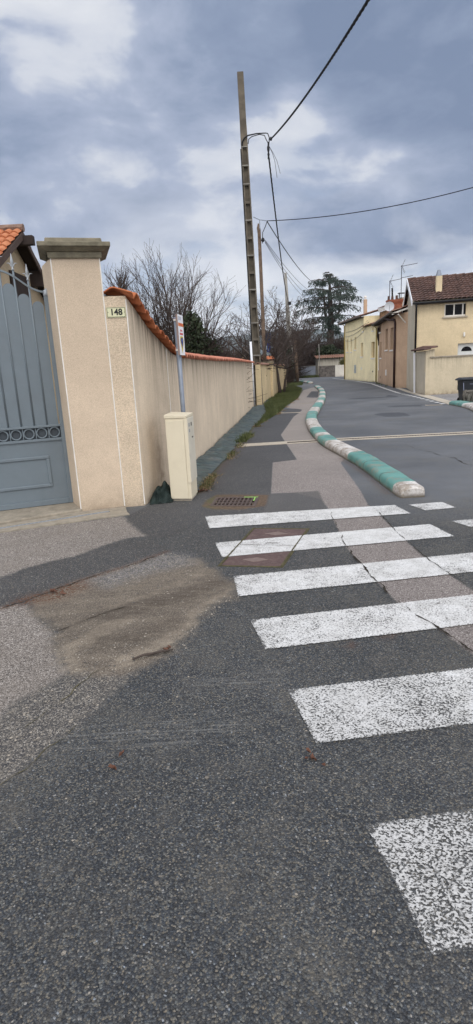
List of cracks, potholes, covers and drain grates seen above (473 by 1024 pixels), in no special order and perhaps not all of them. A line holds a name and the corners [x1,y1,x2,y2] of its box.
drain grate [210,497,259,506]
manhole cover [218,527,310,568]
